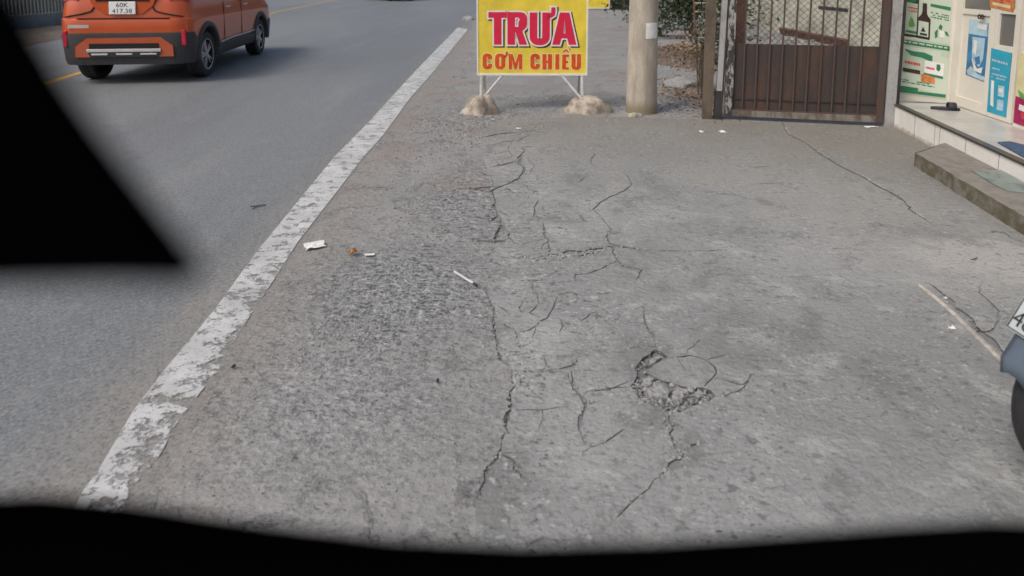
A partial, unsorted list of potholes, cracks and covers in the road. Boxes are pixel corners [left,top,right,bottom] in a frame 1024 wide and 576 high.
crack [468,130,737,499]
crack [749,123,960,227]
pothole [631,349,716,415]
crack [925,282,1007,353]
crack [714,372,754,398]
crack [612,408,704,520]
